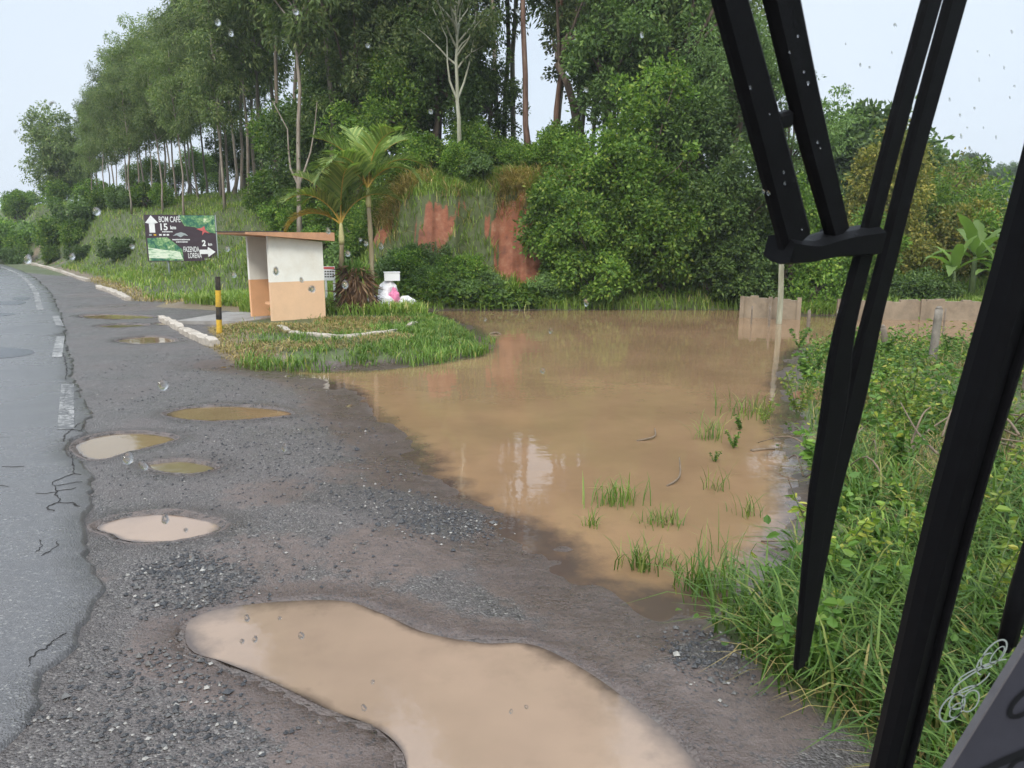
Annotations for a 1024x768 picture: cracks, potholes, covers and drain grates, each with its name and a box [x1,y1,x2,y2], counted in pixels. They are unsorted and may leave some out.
pothole [146,458,221,475]
pothole [114,335,179,344]
pothole [87,508,229,544]
crack [28,633,66,667]
pothole [160,403,297,422]
pothole [175,596,713,768]
pothole [69,430,180,460]
crack [38,353,86,511]
